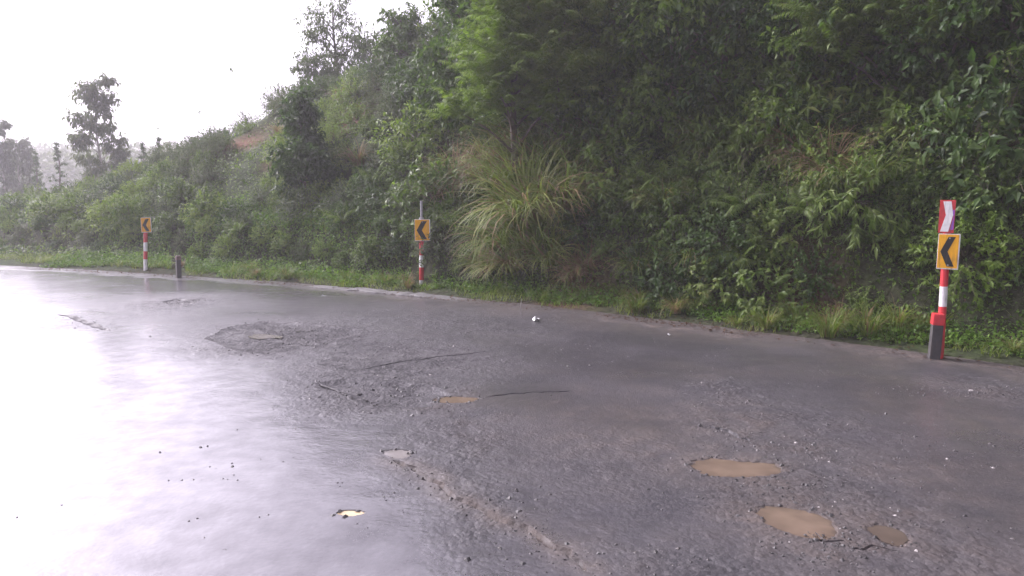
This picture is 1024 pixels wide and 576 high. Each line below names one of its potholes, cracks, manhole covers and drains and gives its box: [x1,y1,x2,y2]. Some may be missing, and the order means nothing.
pothole [681,455,794,478]
pothole [380,448,417,459]
crack [319,350,493,406]
pothole [858,521,917,548]
pothole [204,319,381,356]
pothole [330,509,366,518]
pothole [746,502,847,545]
pothole [433,395,486,404]
